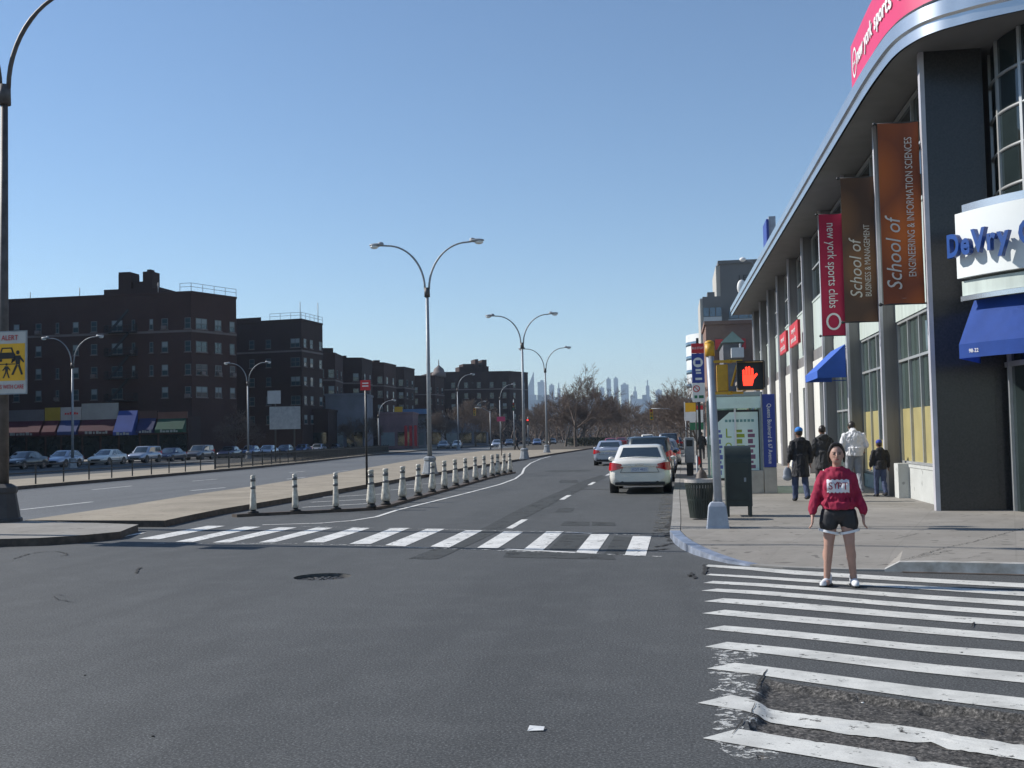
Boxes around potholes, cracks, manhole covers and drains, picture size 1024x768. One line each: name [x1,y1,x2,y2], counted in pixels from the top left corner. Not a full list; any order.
pothole [747,678,1024,768]
